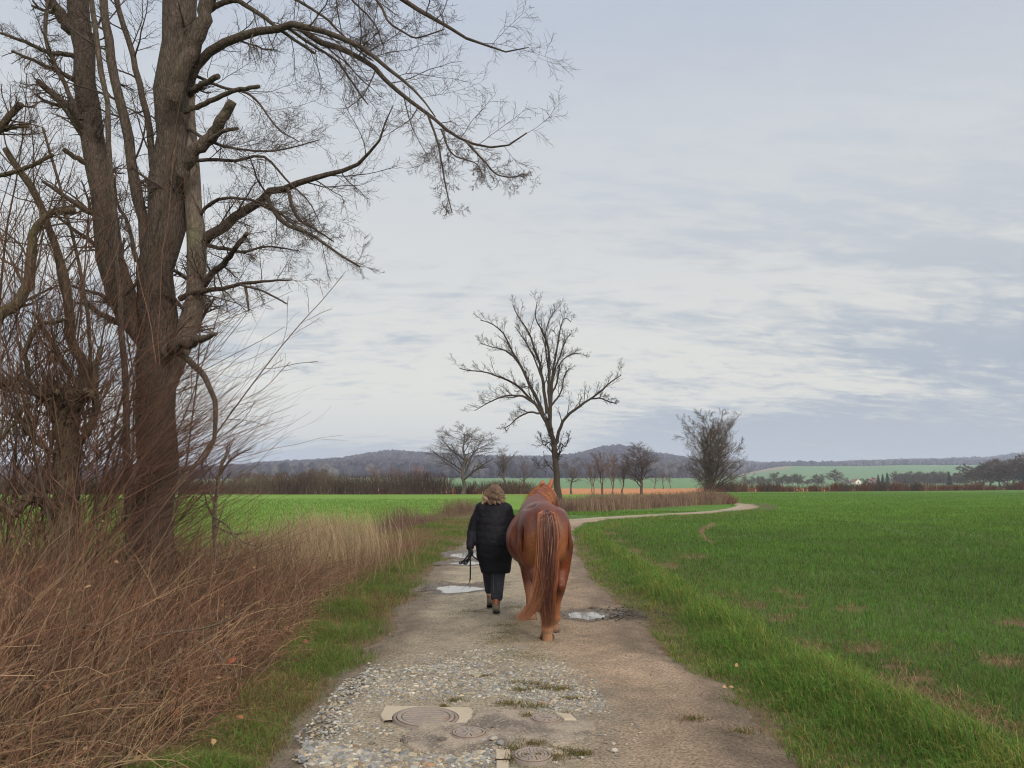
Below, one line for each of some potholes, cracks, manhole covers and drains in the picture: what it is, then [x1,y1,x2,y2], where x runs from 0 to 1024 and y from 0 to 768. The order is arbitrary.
pothole [425,583,485,594]
manhole cover [451,726,487,740]
manhole cover [380,706,473,729]
pothole [440,550,477,560]
manhole cover [530,712,577,724]
pothole [560,609,624,622]
manhole cover [495,747,565,768]
